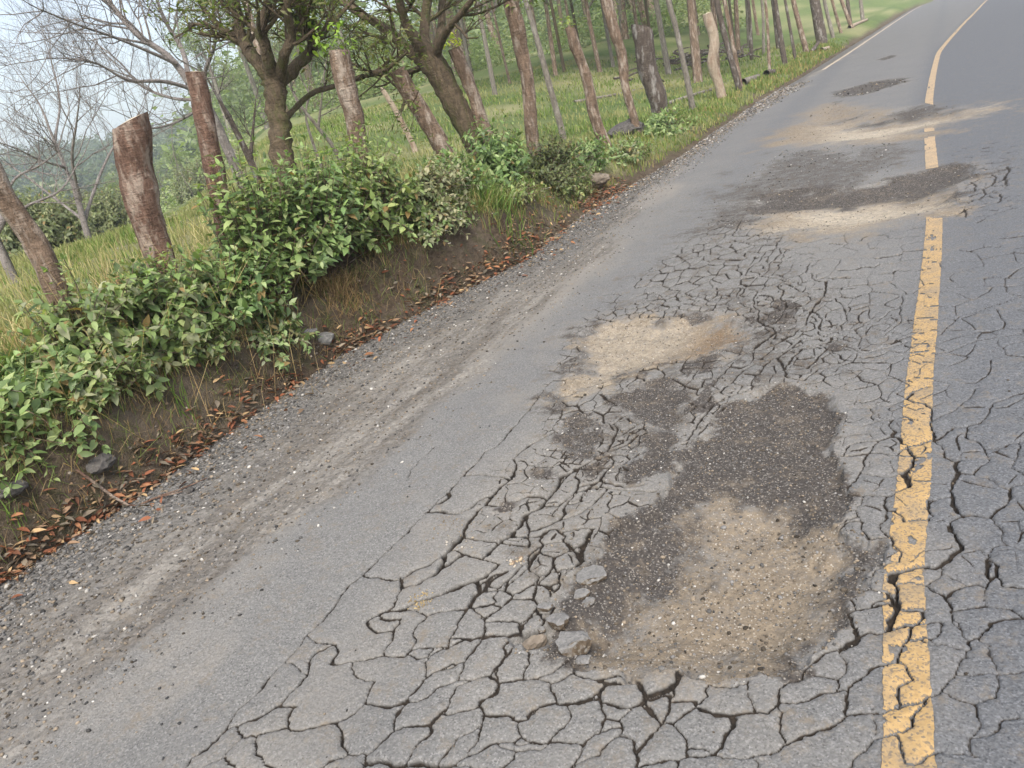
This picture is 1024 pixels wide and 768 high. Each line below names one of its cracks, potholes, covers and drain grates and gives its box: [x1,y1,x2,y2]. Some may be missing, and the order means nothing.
pothole [507,381,890,685]
pothole [541,311,756,405]
crack [186,219,1024,768]
crack [943,147,1011,222]
